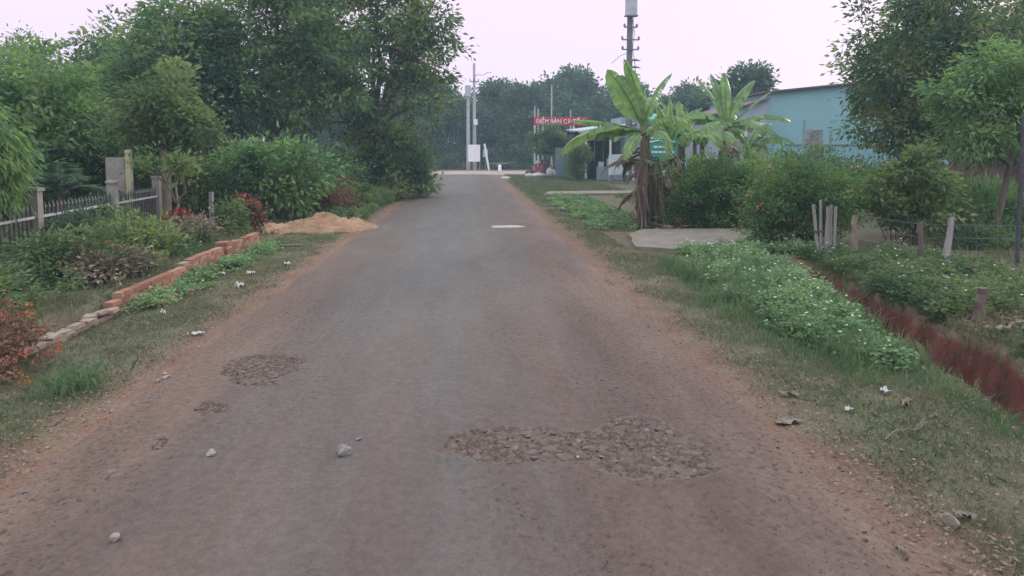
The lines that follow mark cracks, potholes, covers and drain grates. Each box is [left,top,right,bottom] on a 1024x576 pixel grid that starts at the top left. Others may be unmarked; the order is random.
pothole [432,415,725,482]
pothole [145,435,170,452]
pothole [190,400,230,416]
pothole [220,353,314,388]
